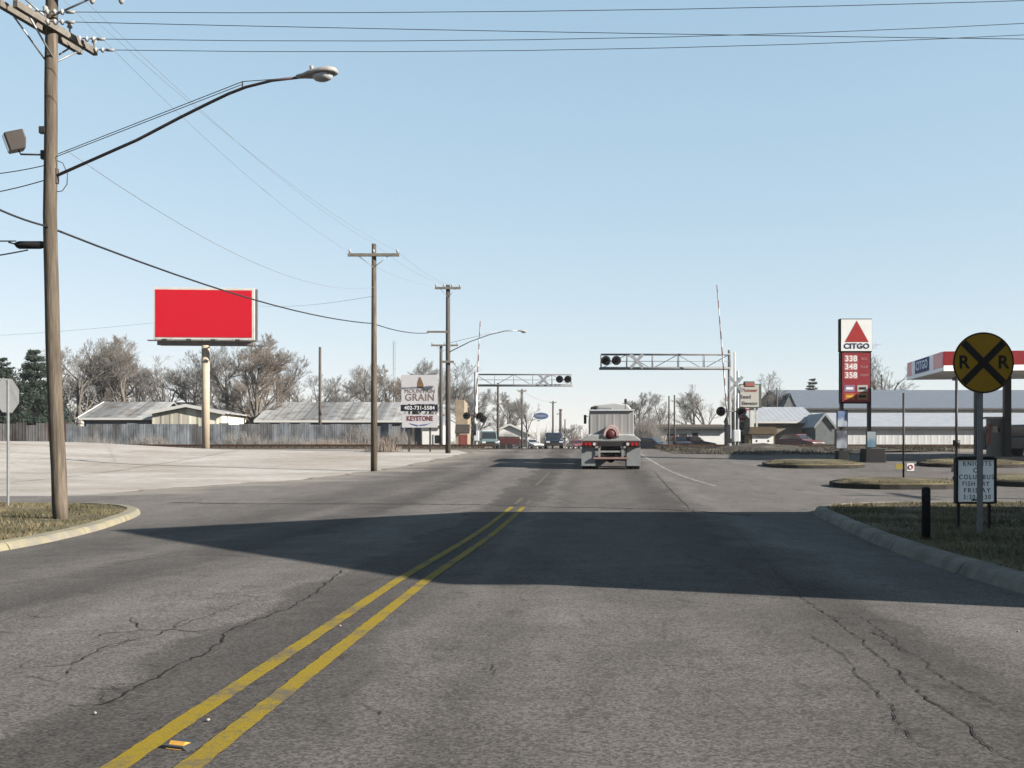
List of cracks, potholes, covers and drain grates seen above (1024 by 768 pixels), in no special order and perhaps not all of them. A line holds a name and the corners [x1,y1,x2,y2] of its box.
crack [3,571,342,706]
crack [725,522,1023,762]
